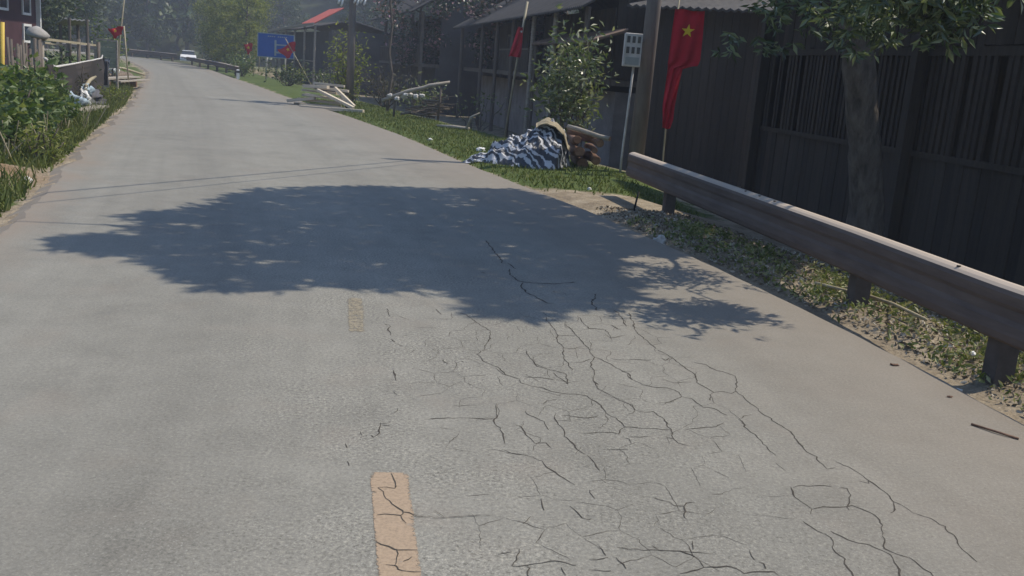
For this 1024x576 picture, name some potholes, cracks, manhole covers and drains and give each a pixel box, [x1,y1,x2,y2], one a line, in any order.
crack [374,473,475,572]
crack [482,241,597,310]
crack [392,309,831,576]
crack [791,462,976,576]
crack [345,309,398,465]
